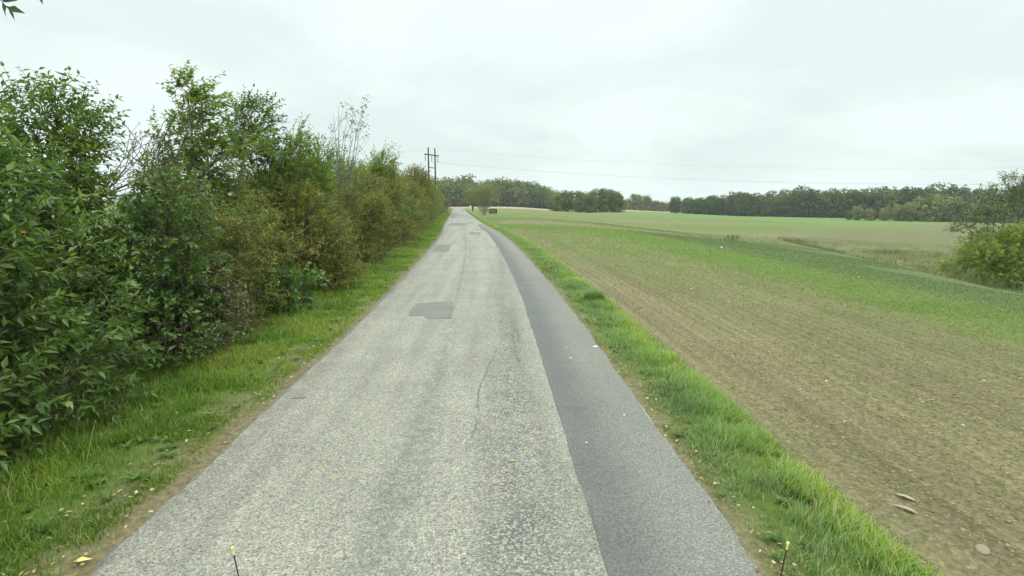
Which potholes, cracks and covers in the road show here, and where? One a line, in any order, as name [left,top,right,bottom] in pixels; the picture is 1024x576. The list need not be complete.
crack [465,324,521,451]
